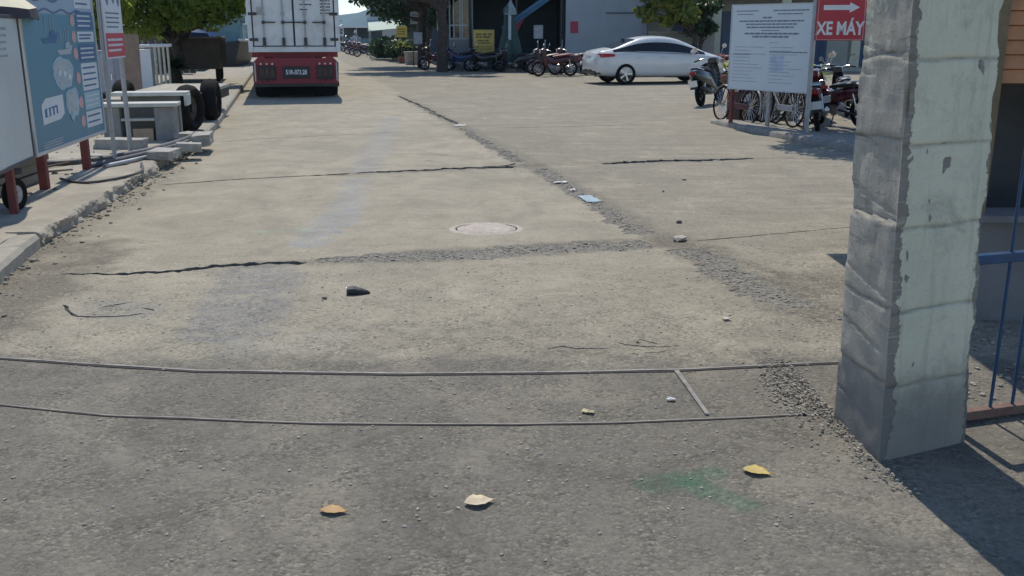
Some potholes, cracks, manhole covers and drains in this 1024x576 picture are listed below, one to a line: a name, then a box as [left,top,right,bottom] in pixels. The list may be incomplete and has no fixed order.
crack [64,261,307,275]
crack [549,339,672,353]
crack [63,301,154,318]
manhole cover [449,222,524,236]
crack [359,163,517,173]
